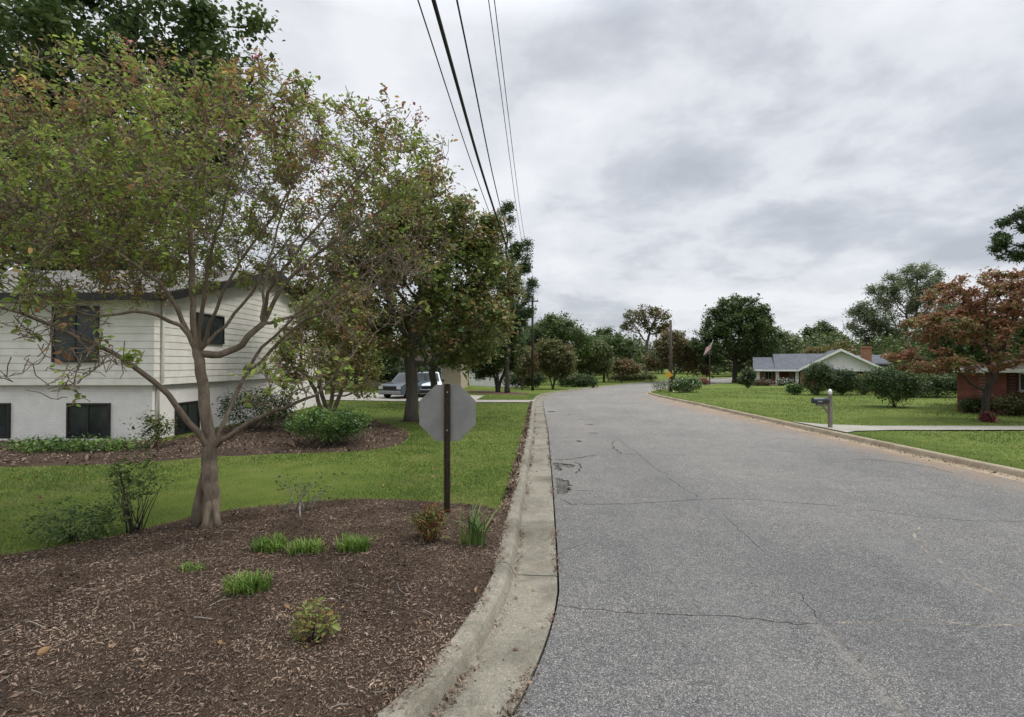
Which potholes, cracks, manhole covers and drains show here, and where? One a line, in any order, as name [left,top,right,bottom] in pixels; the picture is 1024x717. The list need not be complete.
crack [554,441,1024,717]
pothole [555,478,573,494]
